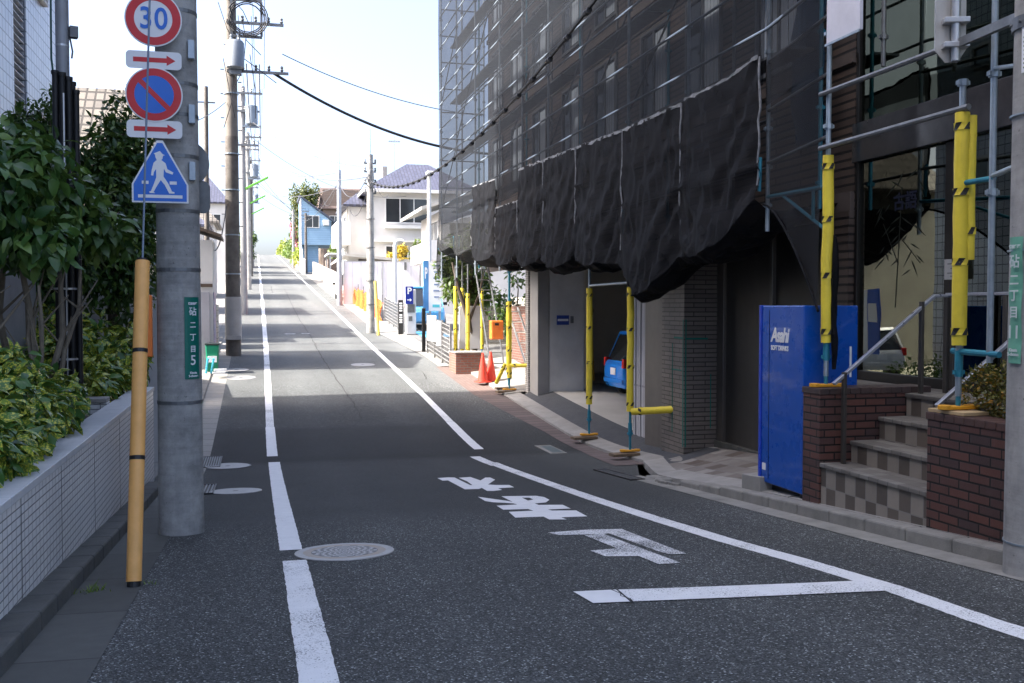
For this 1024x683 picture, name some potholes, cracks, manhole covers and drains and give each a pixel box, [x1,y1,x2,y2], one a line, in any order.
drain grate [204,484,217,495]
drain grate [203,456,223,468]
utility cover [534,445,567,454]
manhole cover [294,543,394,561]
drain grate [593,469,645,481]
